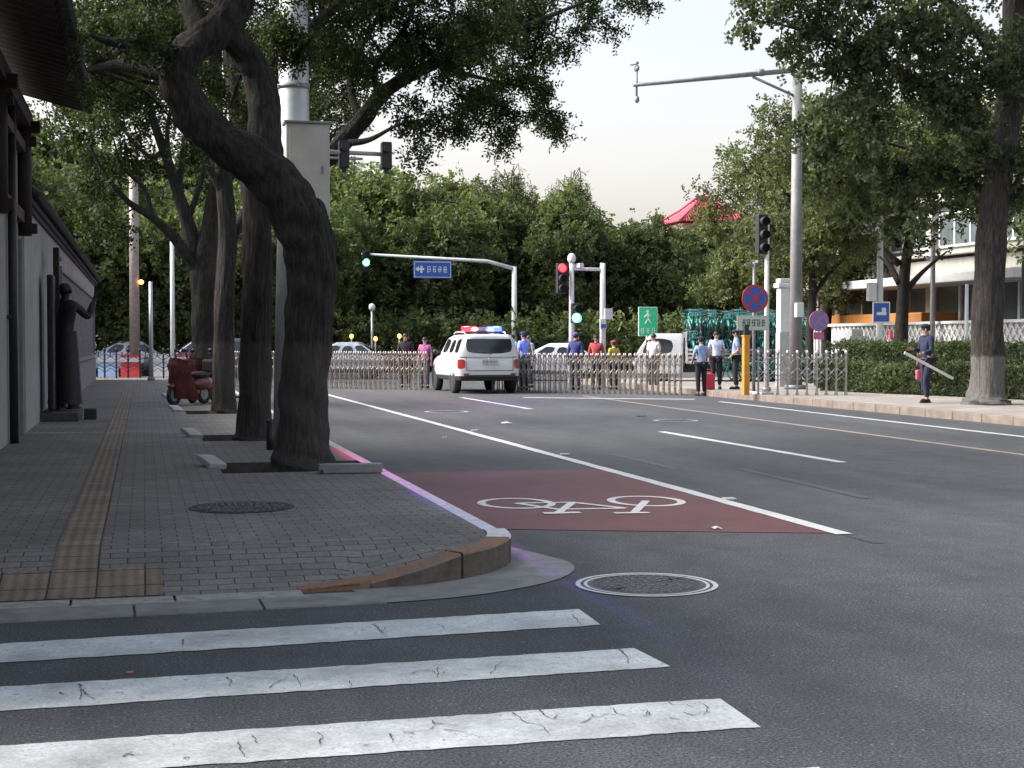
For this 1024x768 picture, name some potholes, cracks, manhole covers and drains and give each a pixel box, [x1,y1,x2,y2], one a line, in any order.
manhole cover [575,573,718,596]
manhole cover [189,501,294,513]
